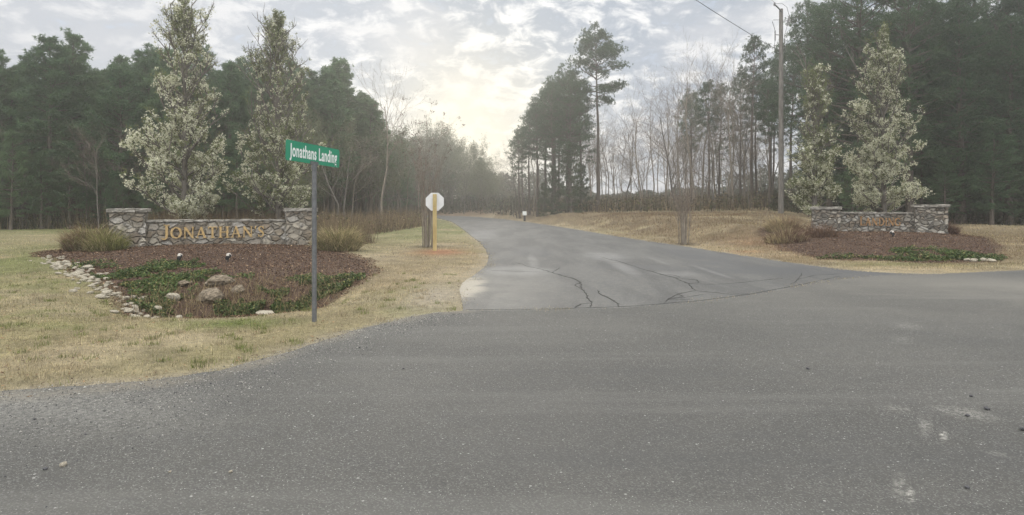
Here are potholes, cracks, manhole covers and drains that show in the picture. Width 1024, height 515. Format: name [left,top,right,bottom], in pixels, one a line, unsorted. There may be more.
crack [473,257,839,310]
